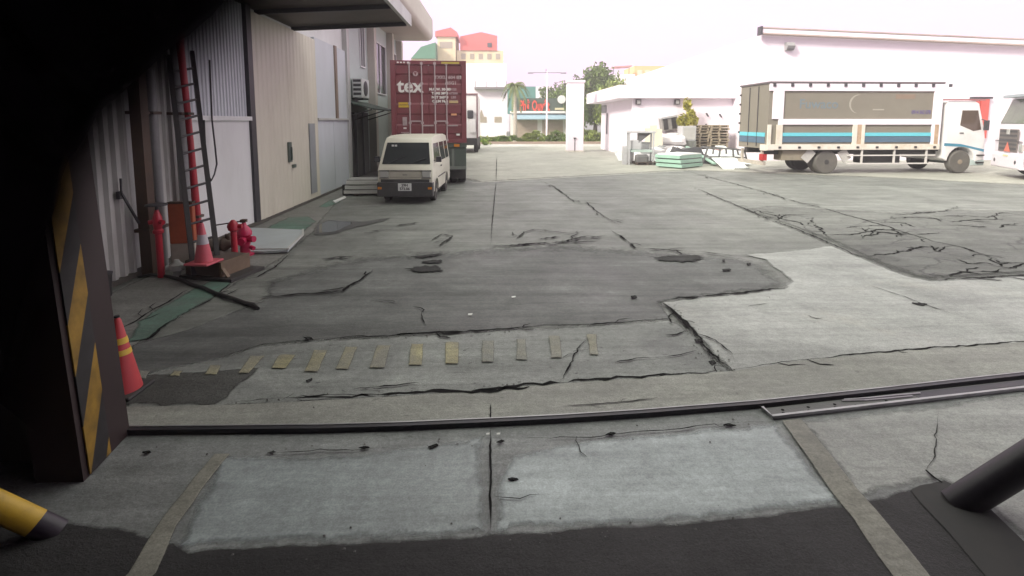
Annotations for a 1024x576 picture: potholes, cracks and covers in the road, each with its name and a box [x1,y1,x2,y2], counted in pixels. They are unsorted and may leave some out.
crack [689,171,1024,280]
crack [232,287,788,407]
crack [926,419,942,483]
crack [495,181,737,256]
crack [124,256,395,341]
